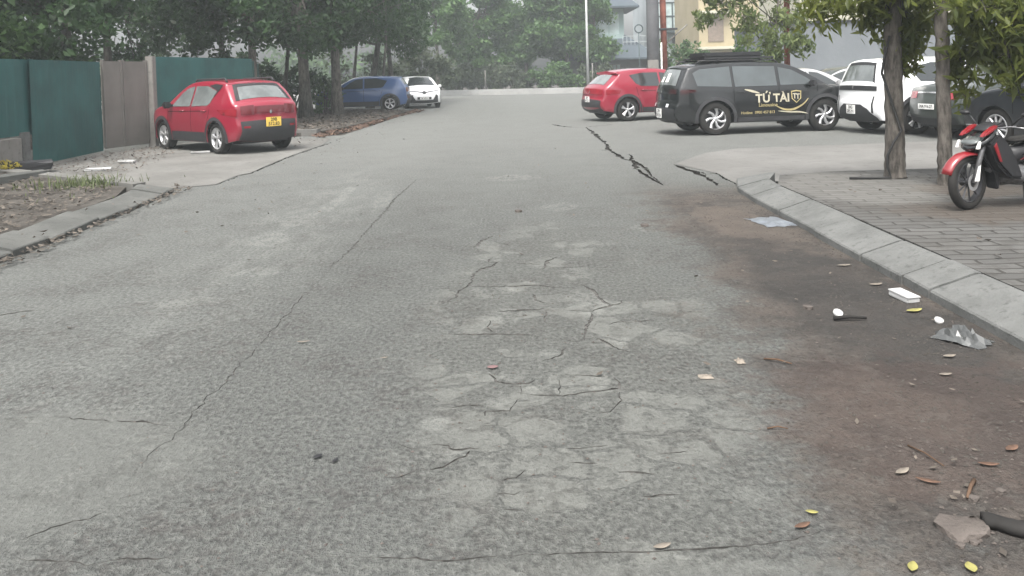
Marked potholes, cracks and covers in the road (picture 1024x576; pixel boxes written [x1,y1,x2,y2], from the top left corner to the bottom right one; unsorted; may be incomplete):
crack [69,181,415,464]
crack [387,234,686,511]
crack [552,124,735,186]
crack [17,512,170,566]
